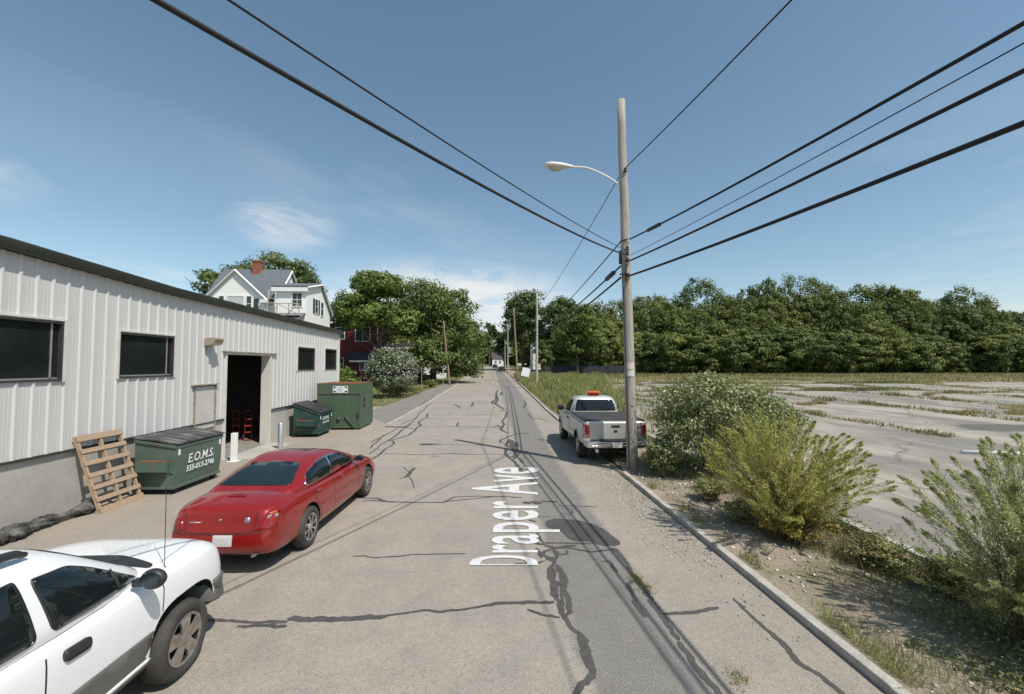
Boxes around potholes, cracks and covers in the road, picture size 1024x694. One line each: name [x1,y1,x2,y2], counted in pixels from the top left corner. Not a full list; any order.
crack [370,396,495,459]
